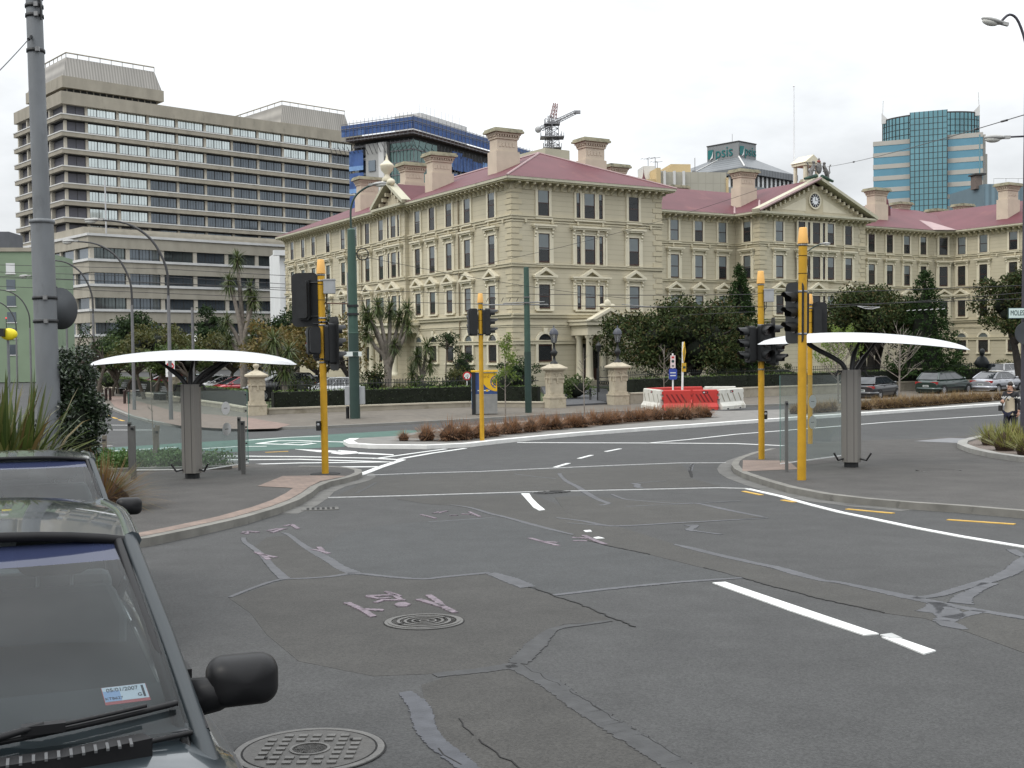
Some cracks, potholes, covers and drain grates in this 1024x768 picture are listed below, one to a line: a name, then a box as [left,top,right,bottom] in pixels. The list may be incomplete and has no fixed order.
crack [459,718,520,768]
manhole cover [383,613,465,630]
manhole cover [234,728,386,768]
crack [528,587,636,627]
